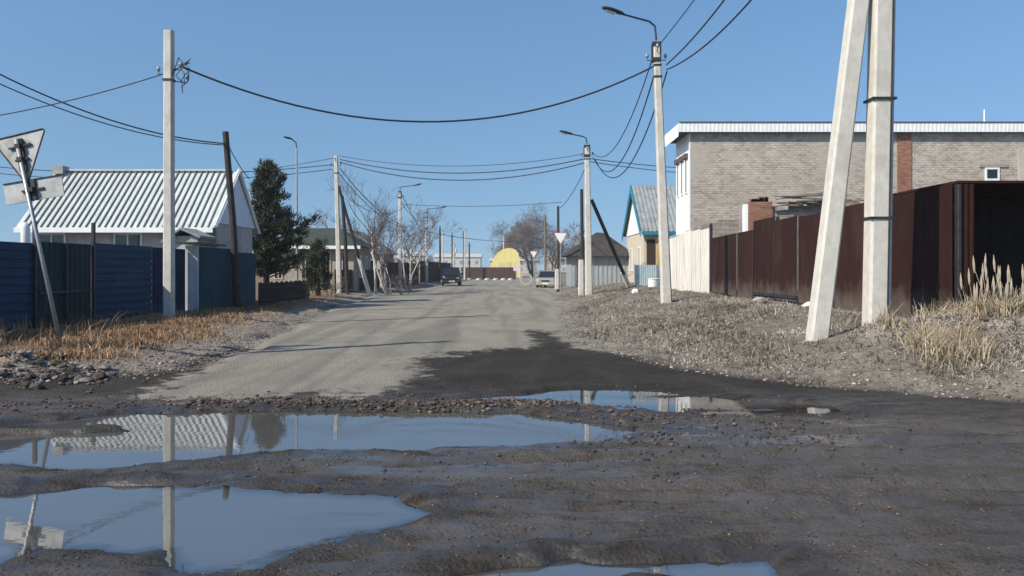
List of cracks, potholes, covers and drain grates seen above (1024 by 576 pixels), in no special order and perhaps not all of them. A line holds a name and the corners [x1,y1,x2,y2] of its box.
pothole [0,403,677,471]
pothole [437,539,812,576]
pothole [0,475,448,576]
pothole [444,386,858,417]
